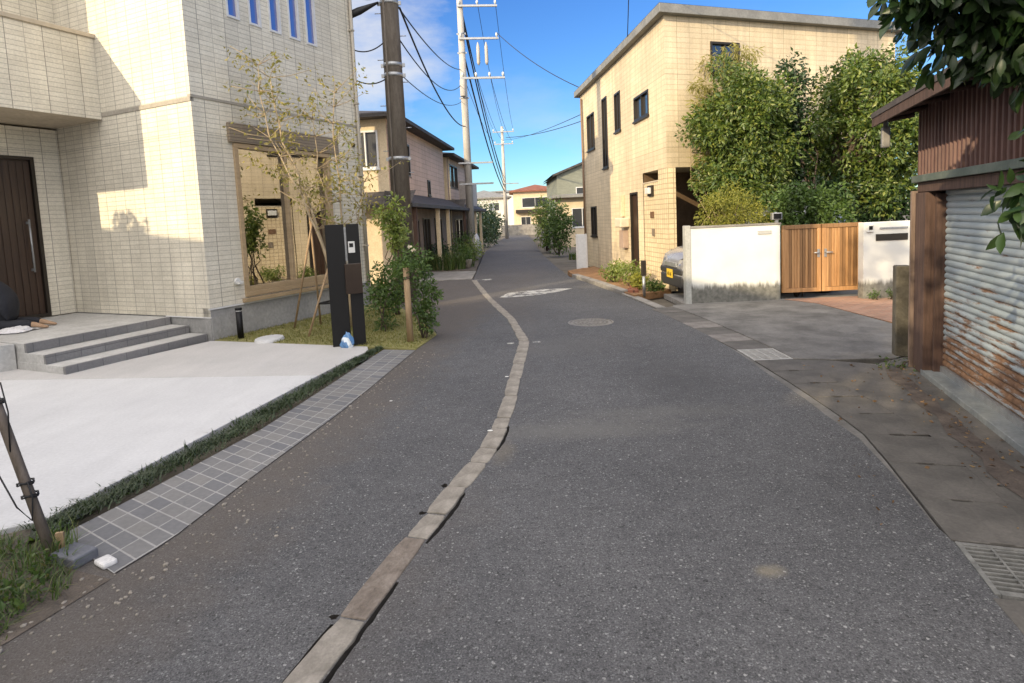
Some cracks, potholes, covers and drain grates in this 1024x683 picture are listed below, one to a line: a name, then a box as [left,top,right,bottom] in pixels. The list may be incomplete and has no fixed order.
drain grate [955,541,1024,601]
drain grate [737,348,793,361]
manhole cover [568,318,614,326]
